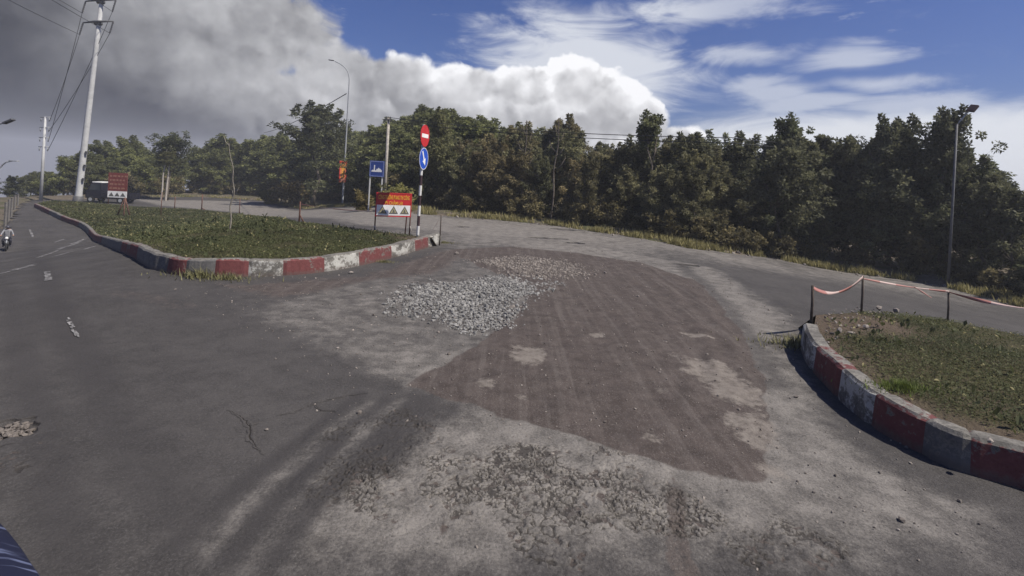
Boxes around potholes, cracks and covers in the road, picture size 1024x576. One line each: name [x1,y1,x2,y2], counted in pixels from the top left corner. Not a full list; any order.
crack [227,393,902,576]
pothole [0,408,61,447]
